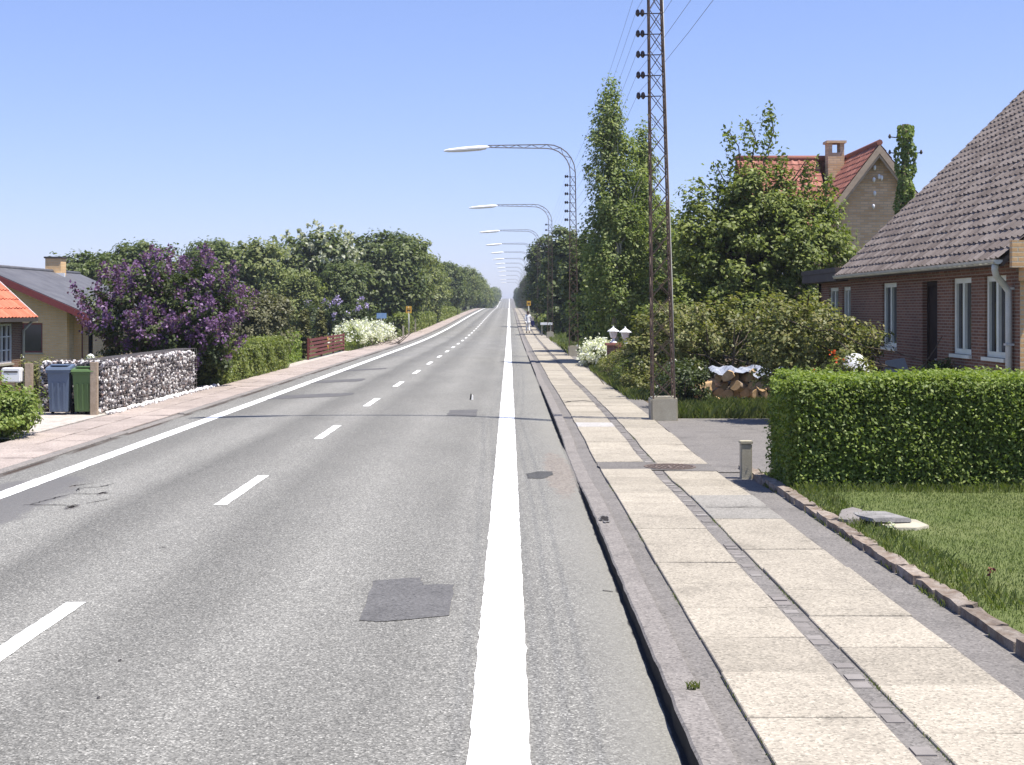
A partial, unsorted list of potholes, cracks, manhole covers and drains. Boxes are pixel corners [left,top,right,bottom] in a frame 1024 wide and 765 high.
crack [25,483,114,505]
